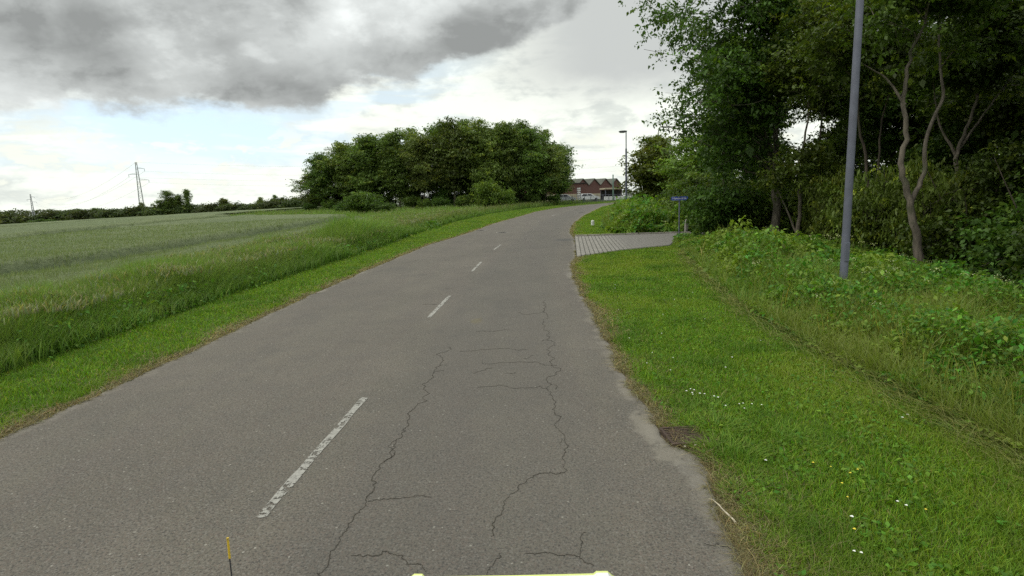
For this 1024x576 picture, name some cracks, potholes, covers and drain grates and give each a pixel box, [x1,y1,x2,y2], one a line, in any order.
crack [460,302,569,574]
crack [527,532,594,566]
crack [317,350,448,575]
drain grate [659,425,713,448]
